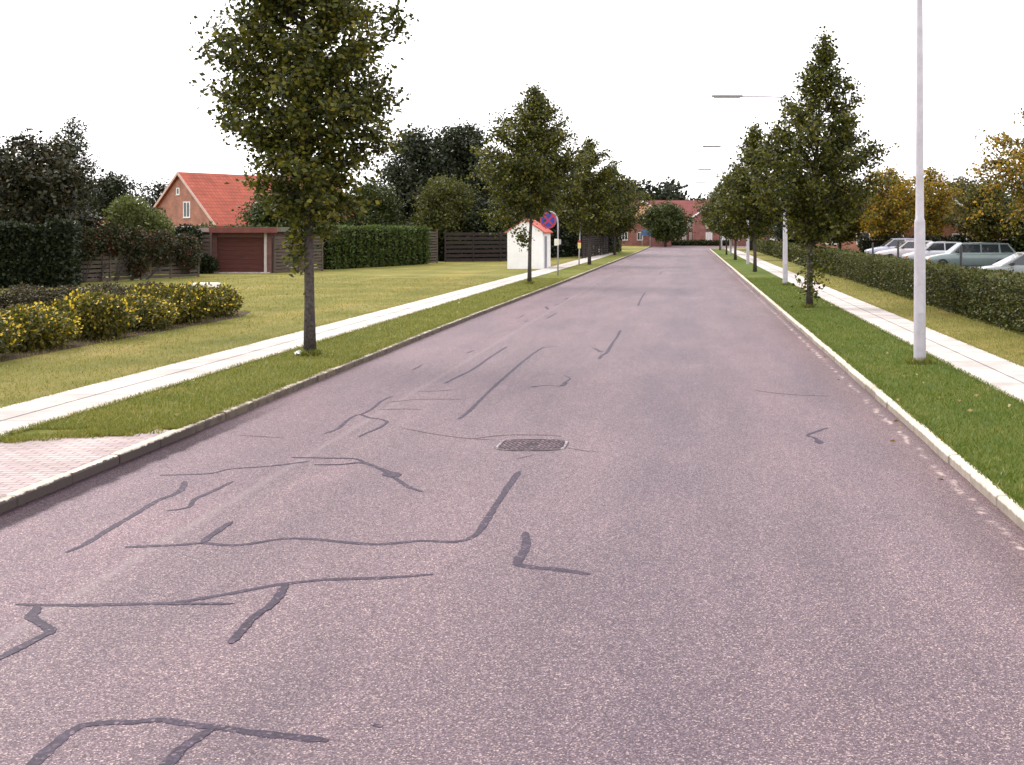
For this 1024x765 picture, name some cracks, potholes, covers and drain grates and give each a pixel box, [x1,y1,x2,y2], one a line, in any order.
manhole cover [494,439,569,451]
